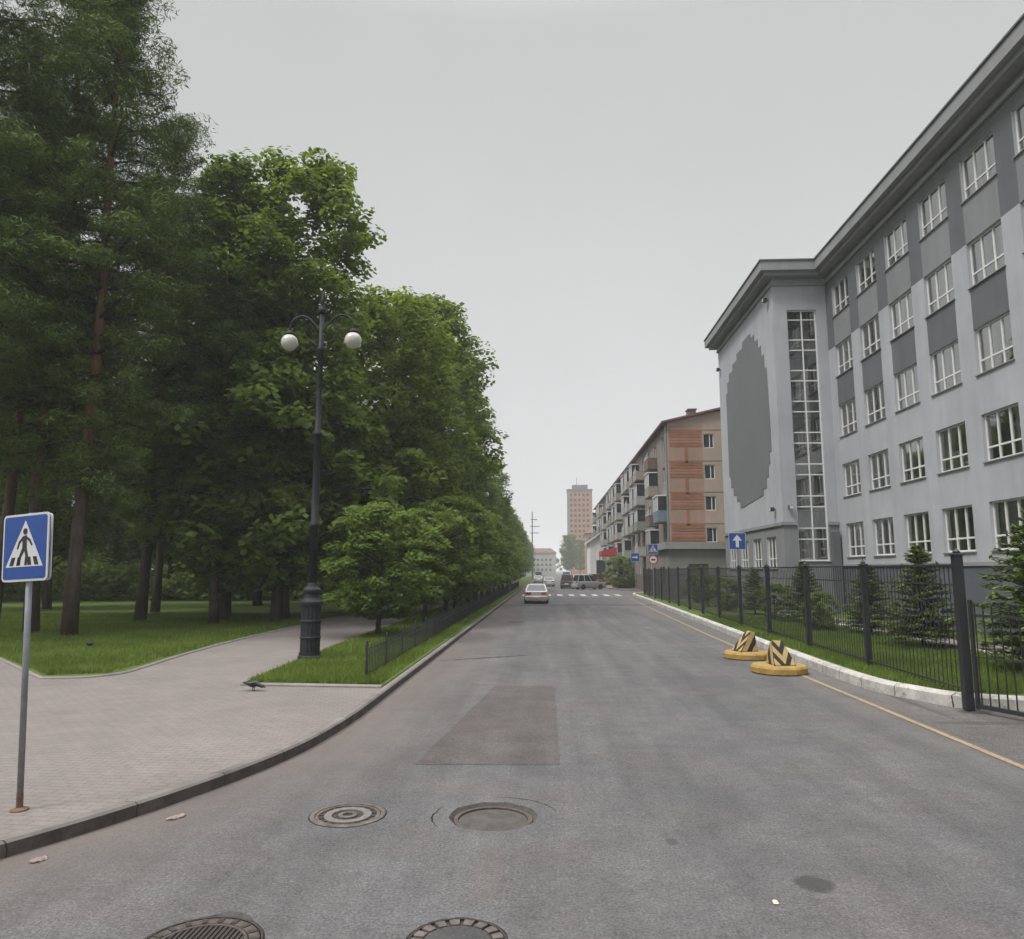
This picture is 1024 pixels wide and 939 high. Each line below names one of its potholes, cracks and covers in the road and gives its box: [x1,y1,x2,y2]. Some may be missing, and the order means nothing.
manhole cover [449,802,538,831]
manhole cover [308,803,387,828]
manhole cover [406,917,508,939]
